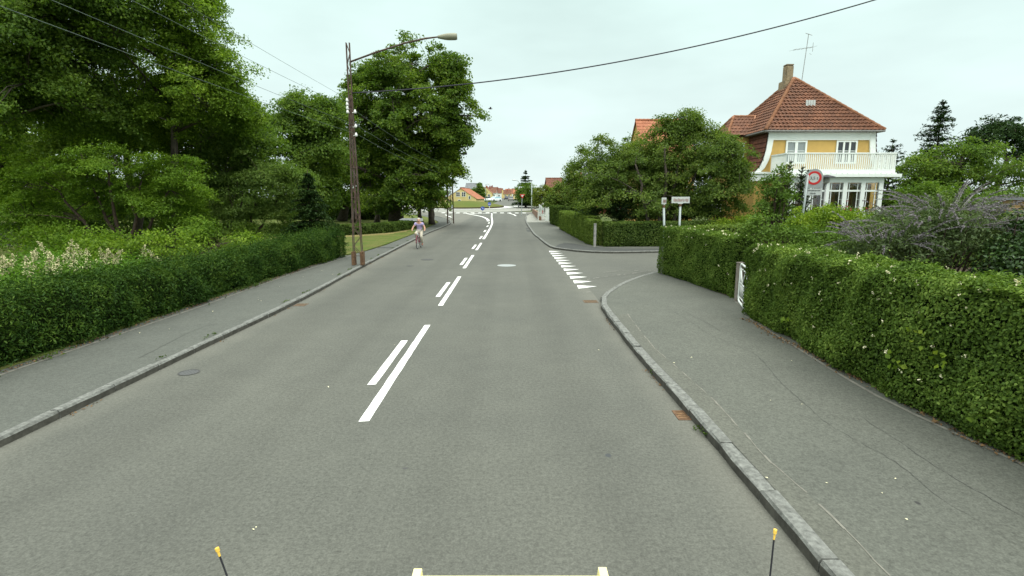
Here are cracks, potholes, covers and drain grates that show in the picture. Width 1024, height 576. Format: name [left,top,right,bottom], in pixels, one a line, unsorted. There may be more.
drain grate [672,410,692,420]
